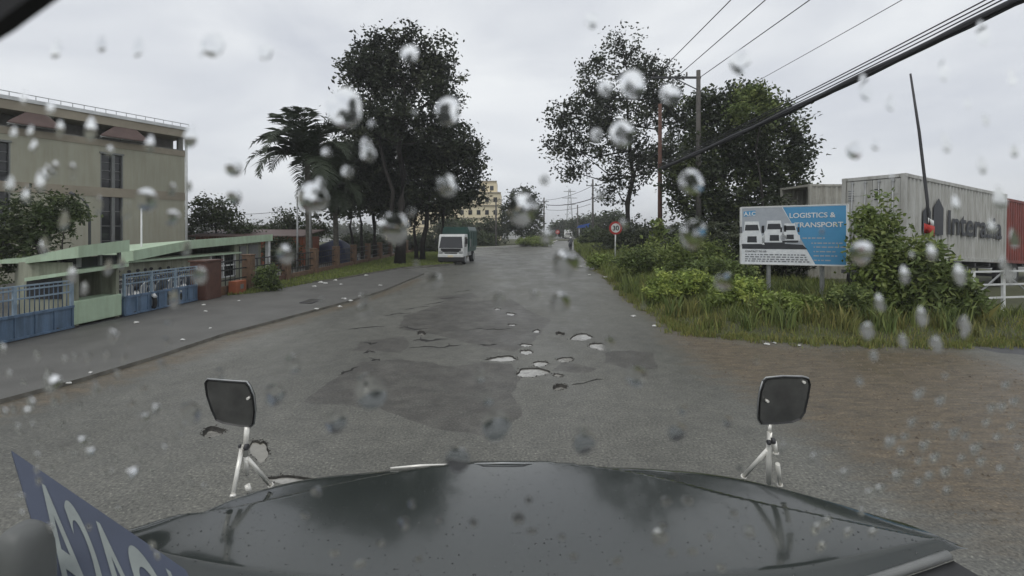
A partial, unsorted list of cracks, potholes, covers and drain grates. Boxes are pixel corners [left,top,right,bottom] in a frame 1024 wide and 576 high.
pothole [248,438,271,466]
crack [340,290,468,375]
pothole [570,332,595,341]
pothole [516,366,552,378]
pothole [201,425,226,438]
crack [421,328,510,348]
